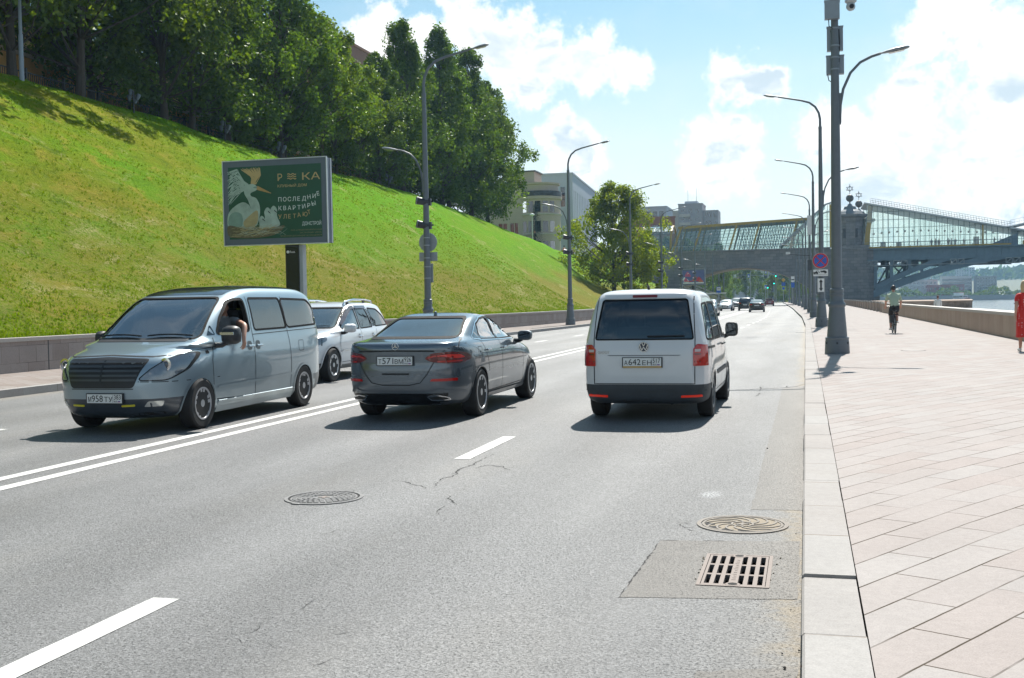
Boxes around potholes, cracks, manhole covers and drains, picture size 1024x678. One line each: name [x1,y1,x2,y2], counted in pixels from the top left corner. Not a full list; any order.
manhole cover [284,490,364,505]
manhole cover [697,515,789,534]
crack [407,454,510,514]
drain grate [695,553,781,589]
